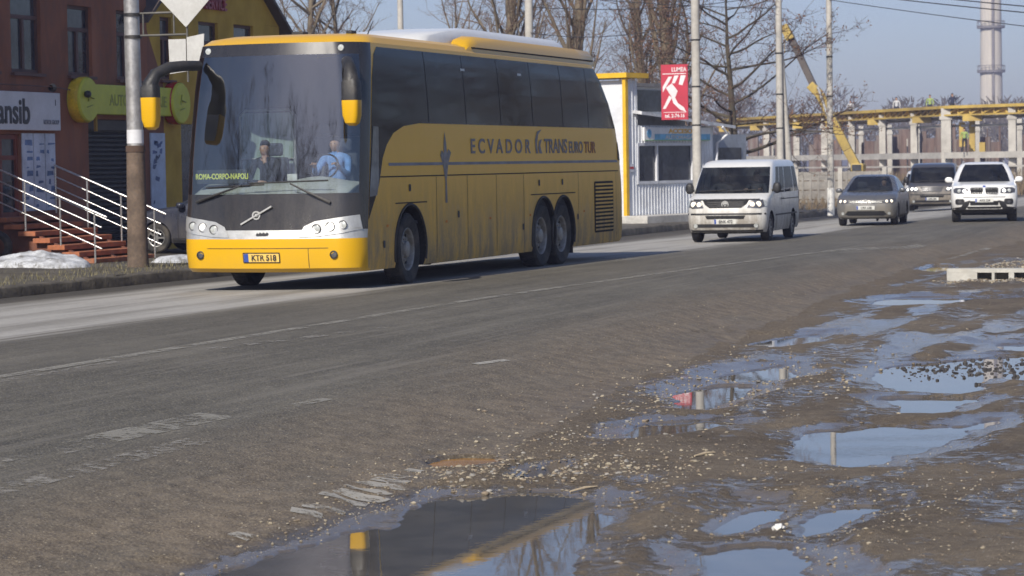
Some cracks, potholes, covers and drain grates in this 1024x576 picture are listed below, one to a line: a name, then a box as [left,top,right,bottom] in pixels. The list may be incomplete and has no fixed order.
pothole [179,487,633,576]
pothole [864,353,1024,394]
pothole [662,383,768,410]
pothole [707,364,807,382]
pothole [773,416,1008,467]
pothole [784,502,898,538]
pothole [697,503,798,536]
